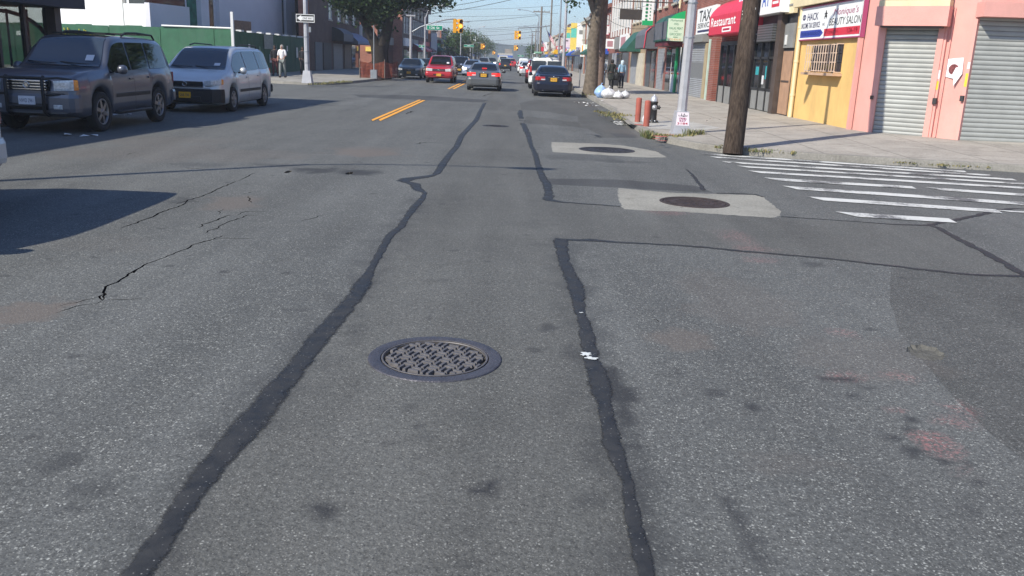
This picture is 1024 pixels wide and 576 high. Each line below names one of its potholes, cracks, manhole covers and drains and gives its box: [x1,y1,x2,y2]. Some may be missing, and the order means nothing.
crack [59,173,262,312]
manhole cover [659,196,730,208]
manhole cover [368,336,501,383]
